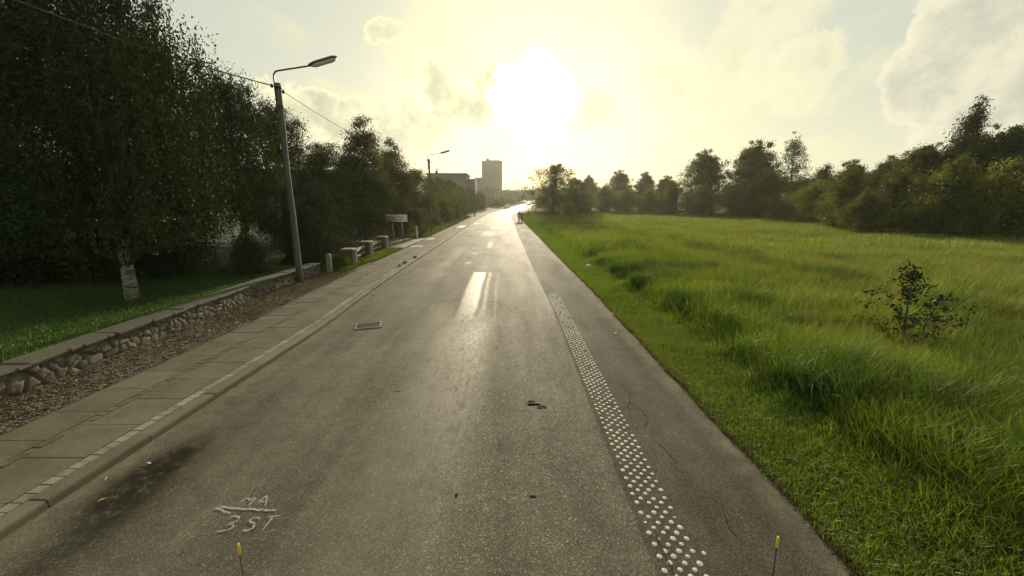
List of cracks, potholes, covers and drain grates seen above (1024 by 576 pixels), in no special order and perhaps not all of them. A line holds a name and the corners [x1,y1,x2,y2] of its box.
crack [617,381,678,464]
drain grate [354,321,382,330]
